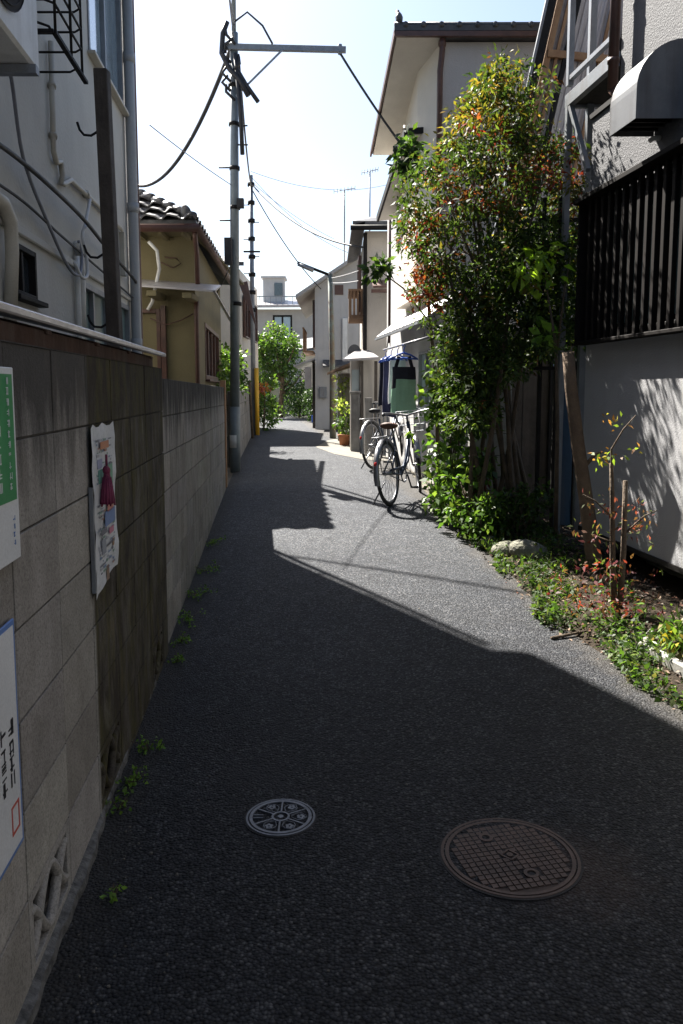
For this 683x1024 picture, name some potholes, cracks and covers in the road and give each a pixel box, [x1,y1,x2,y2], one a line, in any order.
manhole cover [438,818,584,902]
manhole cover [244,799,317,838]
